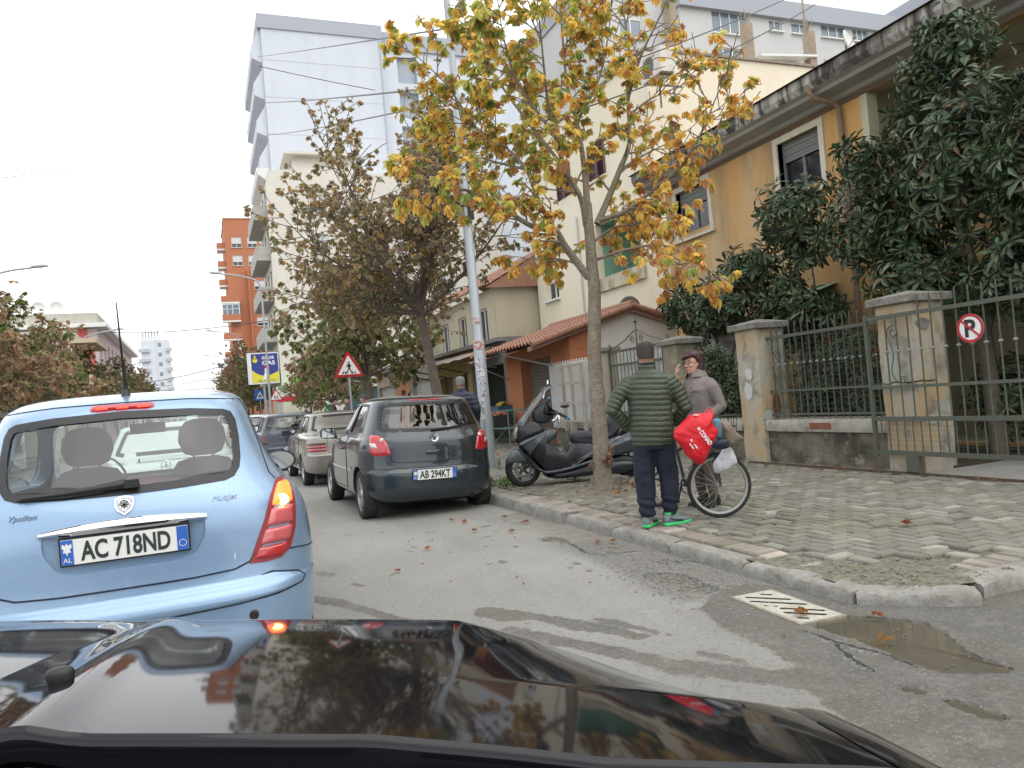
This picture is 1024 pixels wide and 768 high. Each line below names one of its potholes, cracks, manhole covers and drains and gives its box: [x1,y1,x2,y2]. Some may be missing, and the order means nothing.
pothole [802,612,1024,679]
crack [797,630,917,672]
pothole [927,693,1024,729]
drain grate [730,589,847,626]
